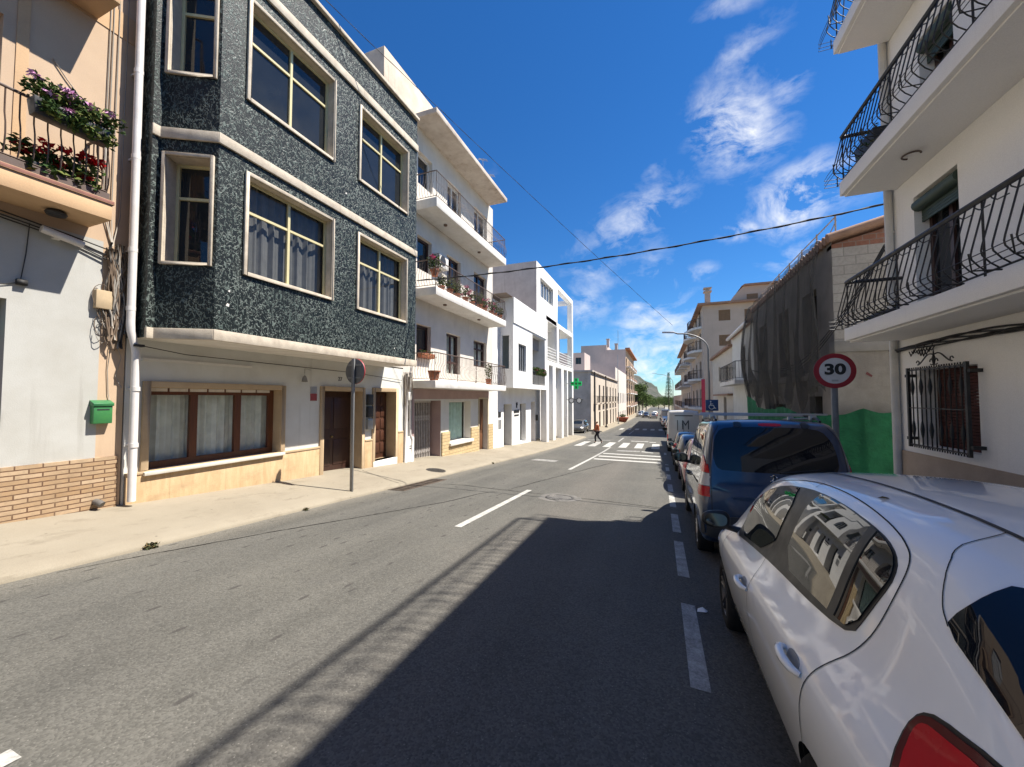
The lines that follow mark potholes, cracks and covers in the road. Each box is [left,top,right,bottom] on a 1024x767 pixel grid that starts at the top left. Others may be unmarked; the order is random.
manhole cover [539,493,582,502]
